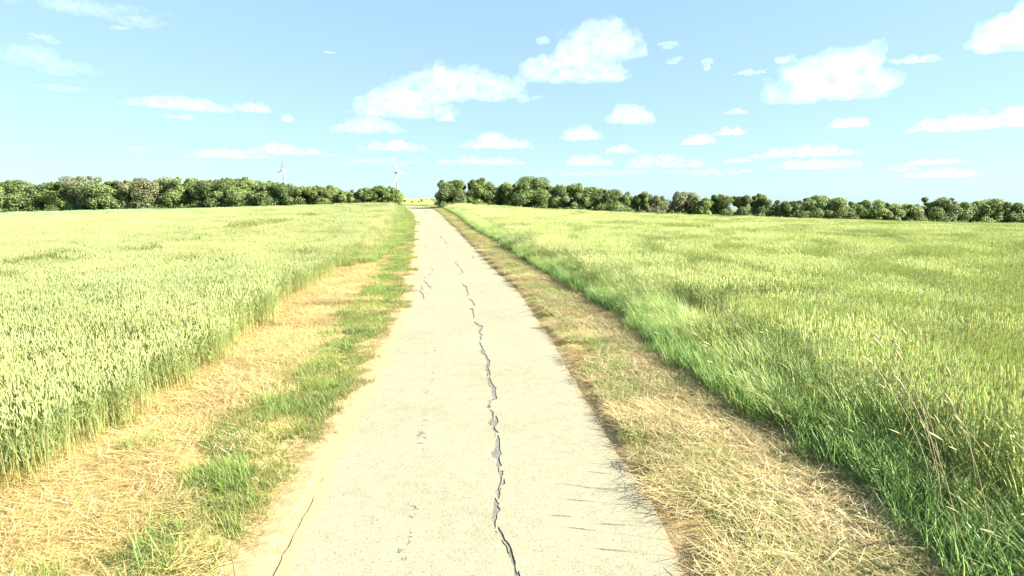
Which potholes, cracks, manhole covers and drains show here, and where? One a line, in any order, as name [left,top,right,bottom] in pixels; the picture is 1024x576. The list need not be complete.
crack [396,505,419,560]
crack [425,211,520,576]
crack [272,478,323,576]
